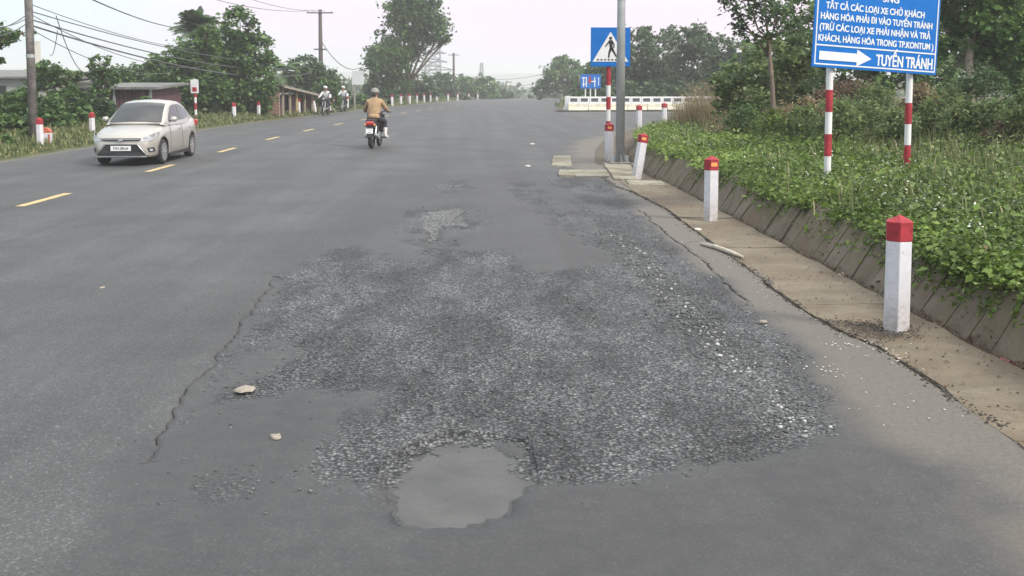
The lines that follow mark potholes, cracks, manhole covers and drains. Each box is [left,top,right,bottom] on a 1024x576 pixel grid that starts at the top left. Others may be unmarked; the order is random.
pothole [347,425,573,540]
pothole [403,206,486,246]
crack [136,276,281,464]
